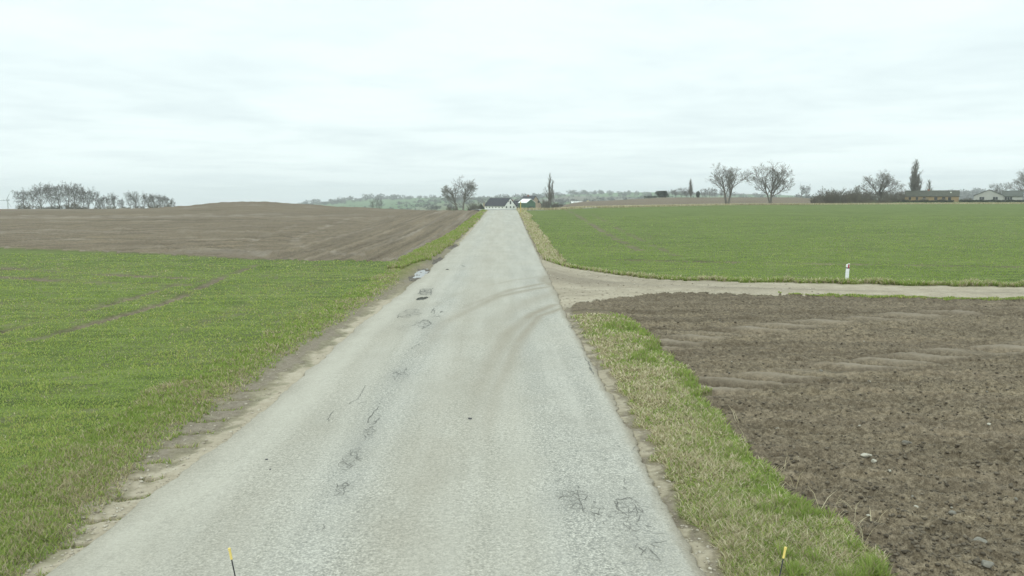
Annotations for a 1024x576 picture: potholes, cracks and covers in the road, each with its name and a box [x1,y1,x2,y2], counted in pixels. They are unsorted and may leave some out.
crack [559,478,667,560]
crack [337,390,380,494]
crack [392,288,443,375]
